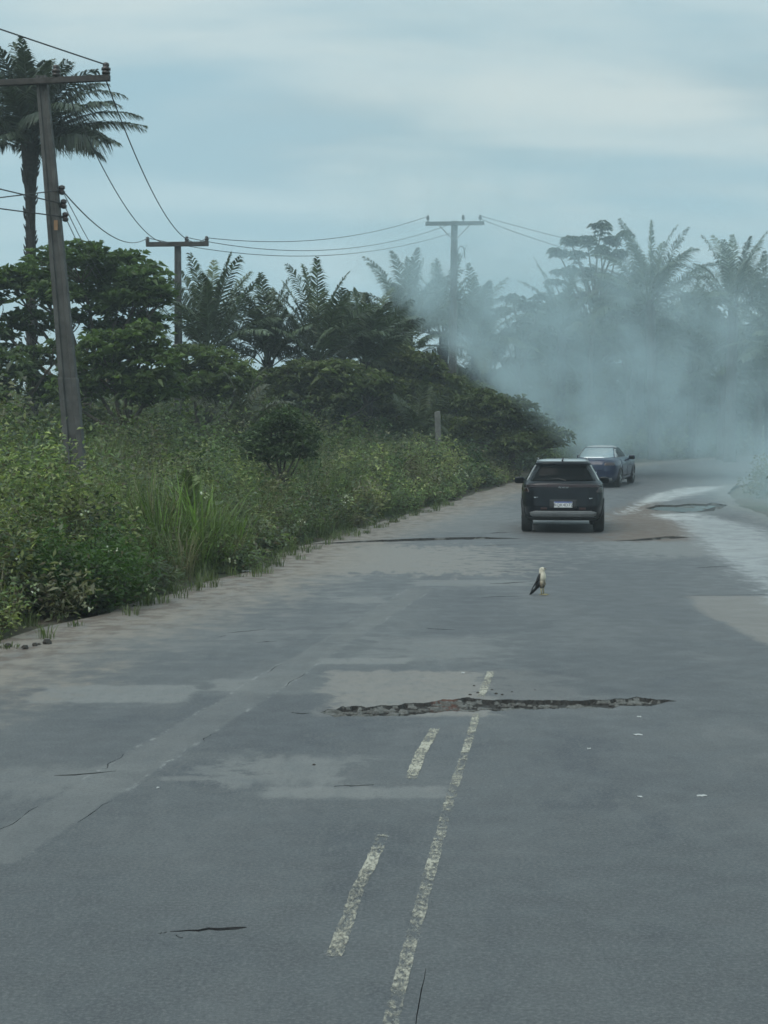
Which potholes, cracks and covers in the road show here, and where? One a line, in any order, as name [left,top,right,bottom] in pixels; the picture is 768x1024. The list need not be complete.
crack [159,927,246,938]
pothole [647,503,727,513]
pothole [321,697,674,718]
crack [416,969,426,1023]
